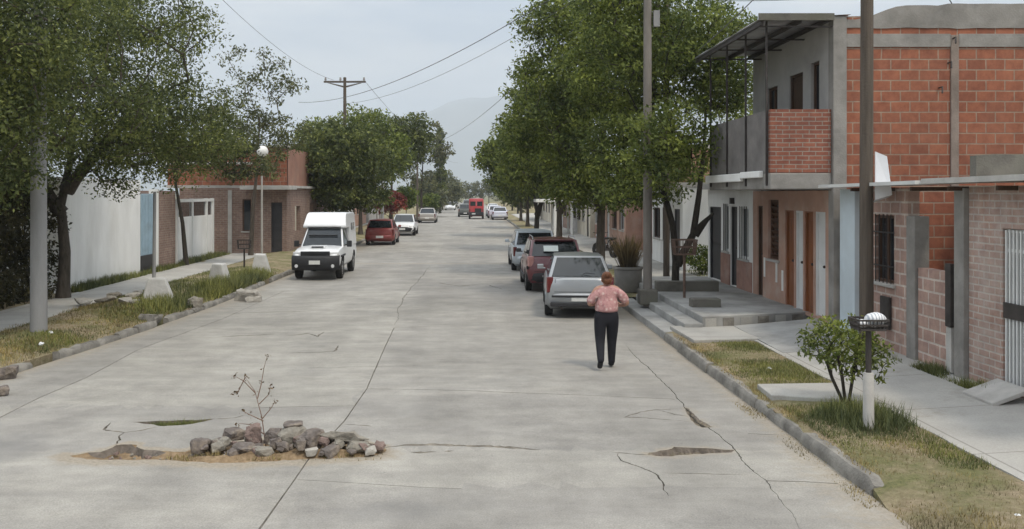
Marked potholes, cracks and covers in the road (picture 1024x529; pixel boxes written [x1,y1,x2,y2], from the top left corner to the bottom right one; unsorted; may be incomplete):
crack [222,332,339,353]
pothole [71,440,386,463]
crack [612,452,668,494]
pothole [648,447,734,456]
crack [625,346,798,525]
crack [385,443,539,453]
crack [103,424,156,445]
